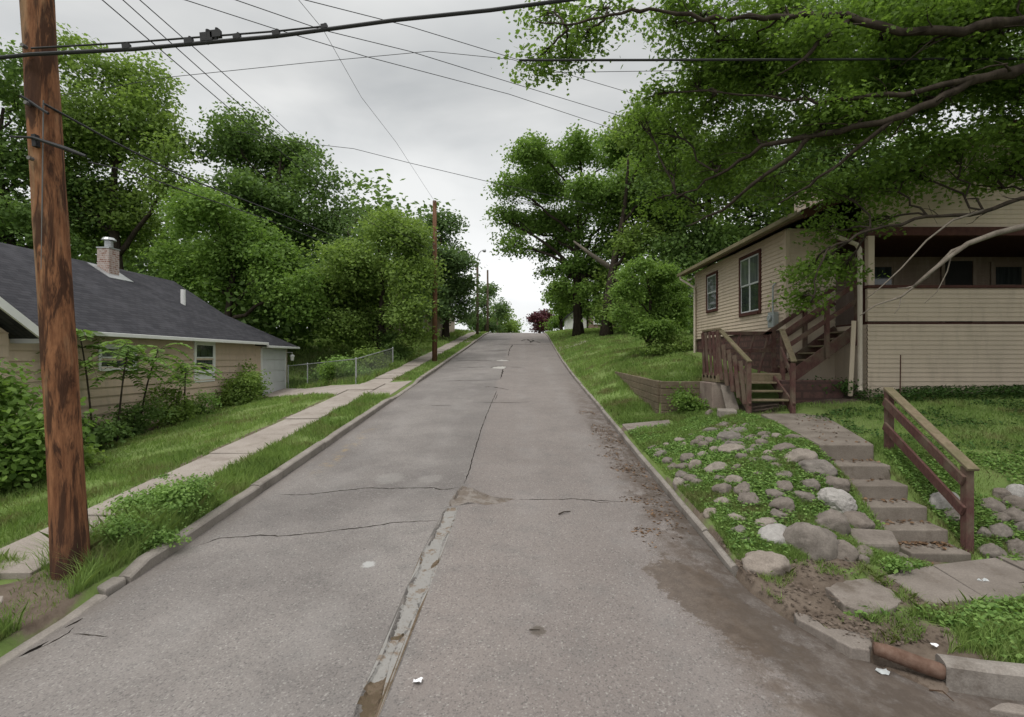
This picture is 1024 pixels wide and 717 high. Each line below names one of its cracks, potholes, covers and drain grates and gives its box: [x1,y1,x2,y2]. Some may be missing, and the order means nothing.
crack [204,520,437,544]
crack [284,487,457,495]
crack [19,618,106,657]
